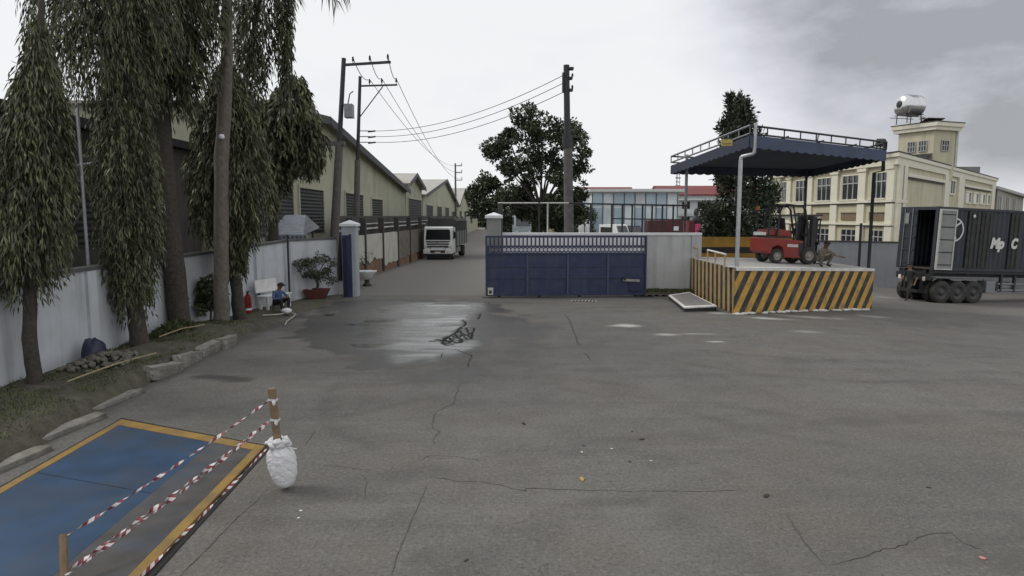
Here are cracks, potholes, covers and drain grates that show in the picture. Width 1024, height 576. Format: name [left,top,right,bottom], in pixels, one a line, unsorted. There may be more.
crack [827,533,976,565]
crack [445,478,720,492]
crack [431,314,482,367]
